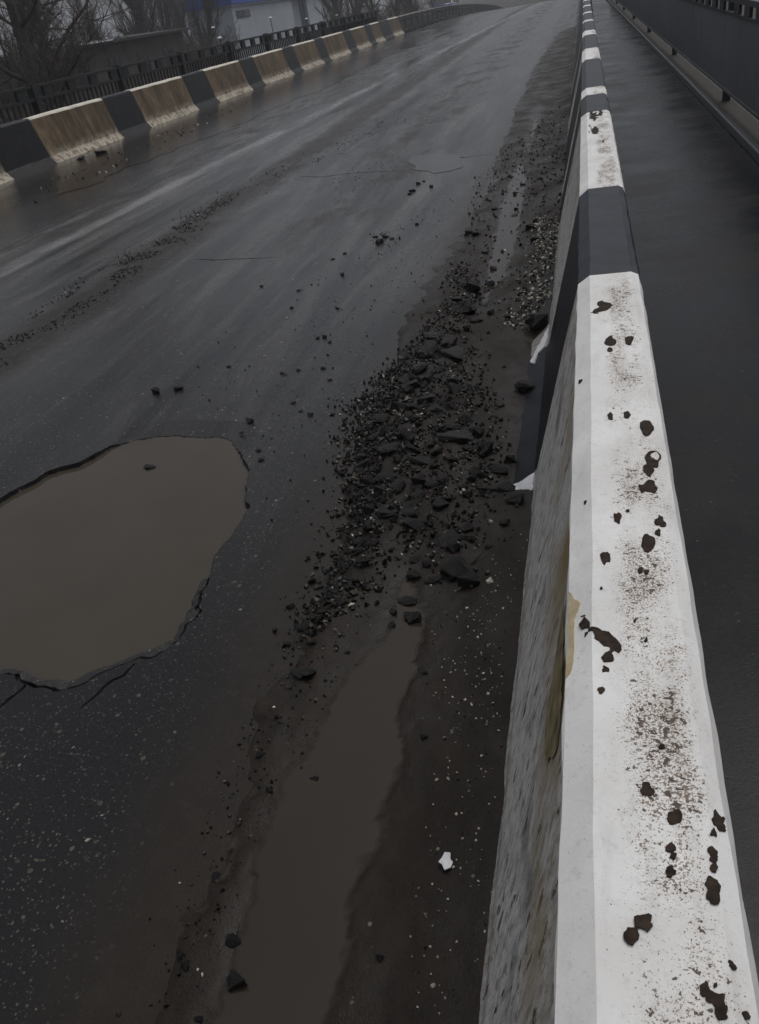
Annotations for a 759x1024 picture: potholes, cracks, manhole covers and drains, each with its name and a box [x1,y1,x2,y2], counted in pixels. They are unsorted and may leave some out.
crack [0,680,28,708]
pothole [0,435,250,692]
crack [81,663,135,708]
